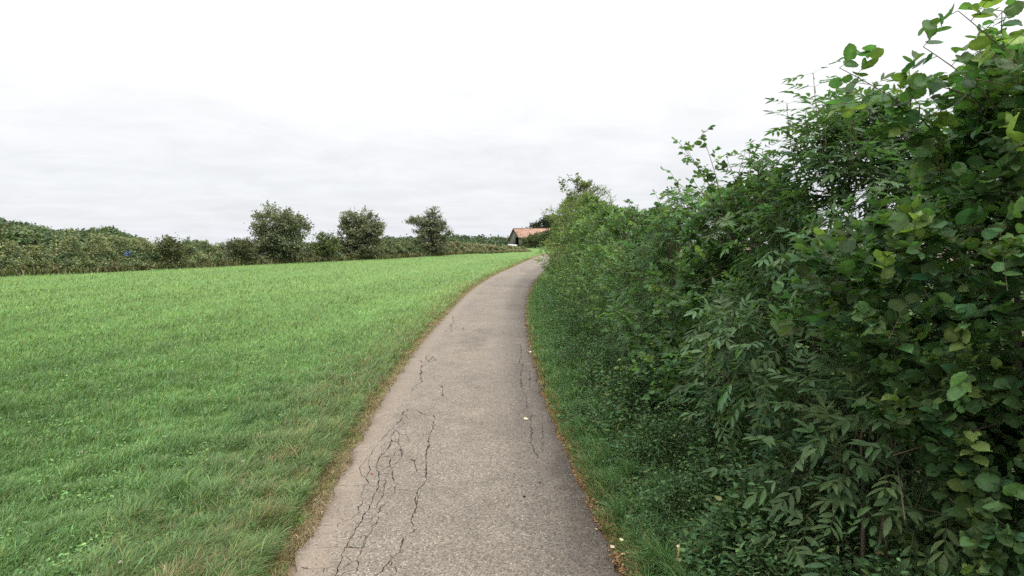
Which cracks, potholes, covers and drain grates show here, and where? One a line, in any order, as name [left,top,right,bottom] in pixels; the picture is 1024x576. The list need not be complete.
crack [518,344,544,458]
crack [301,408,435,576]
